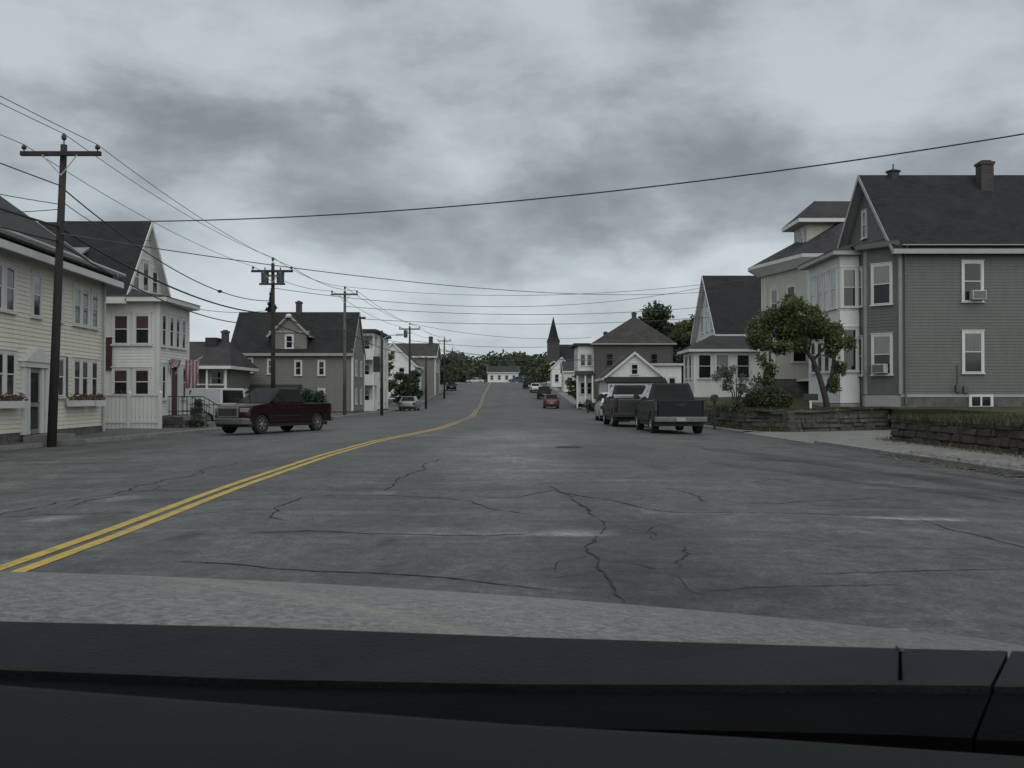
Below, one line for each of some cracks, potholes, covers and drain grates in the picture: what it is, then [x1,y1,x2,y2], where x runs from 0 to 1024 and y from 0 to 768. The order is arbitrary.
crack [174,458,1023,602]
crack [0,460,266,517]
